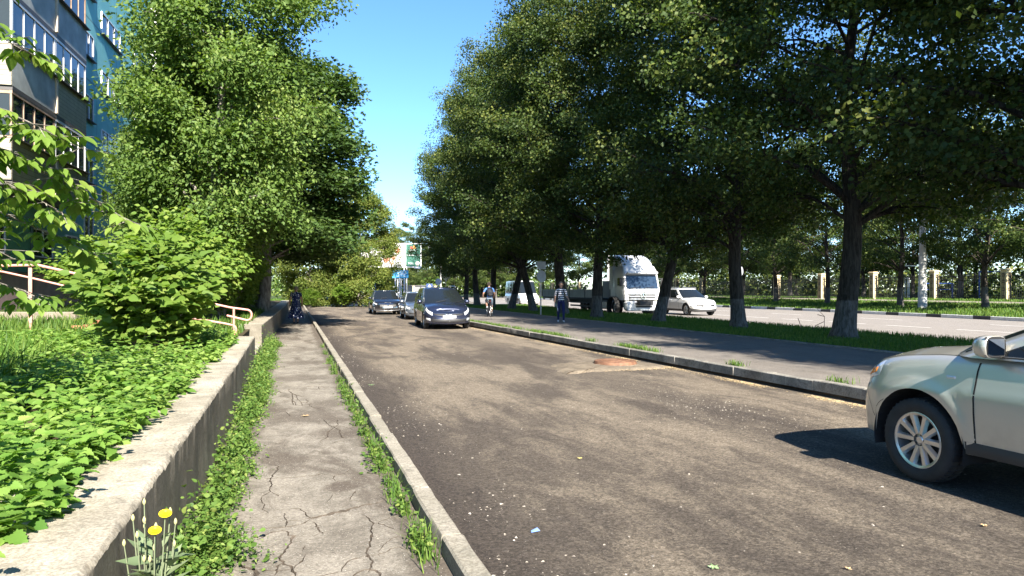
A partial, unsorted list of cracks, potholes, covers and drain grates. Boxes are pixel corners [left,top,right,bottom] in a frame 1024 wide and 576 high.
crack [210,465,411,576]
crack [271,372,353,443]
manhole cover [550,358,664,375]
